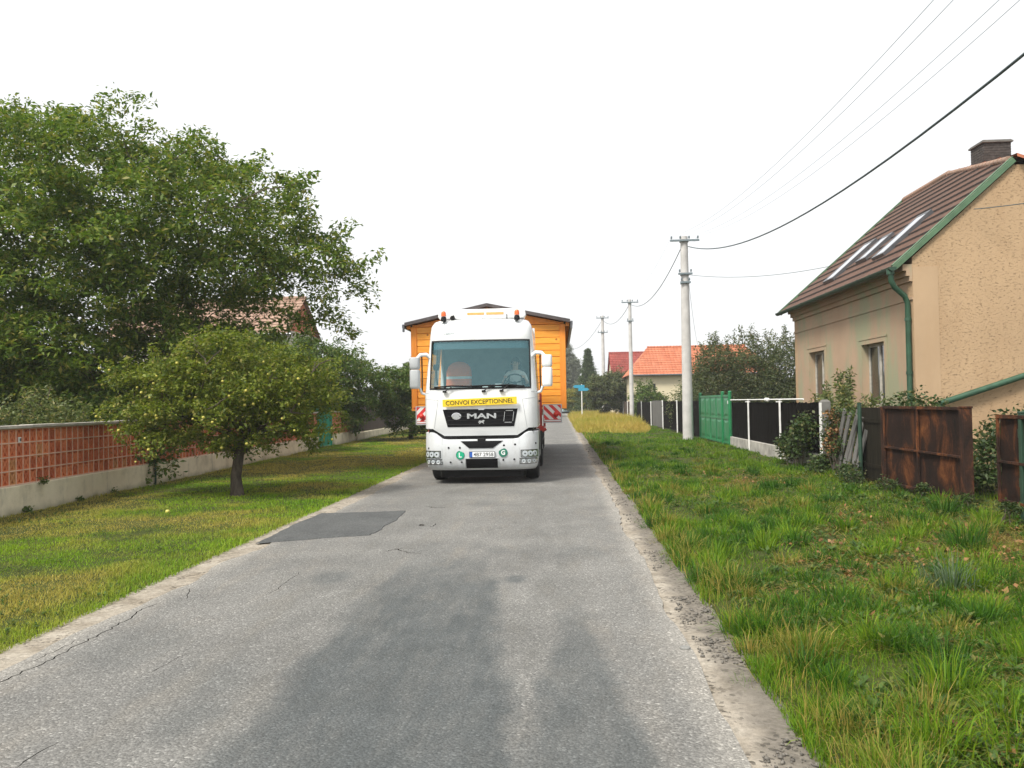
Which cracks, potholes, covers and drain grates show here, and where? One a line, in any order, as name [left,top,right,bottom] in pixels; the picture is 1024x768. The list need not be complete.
crack [1,605,153,682]
